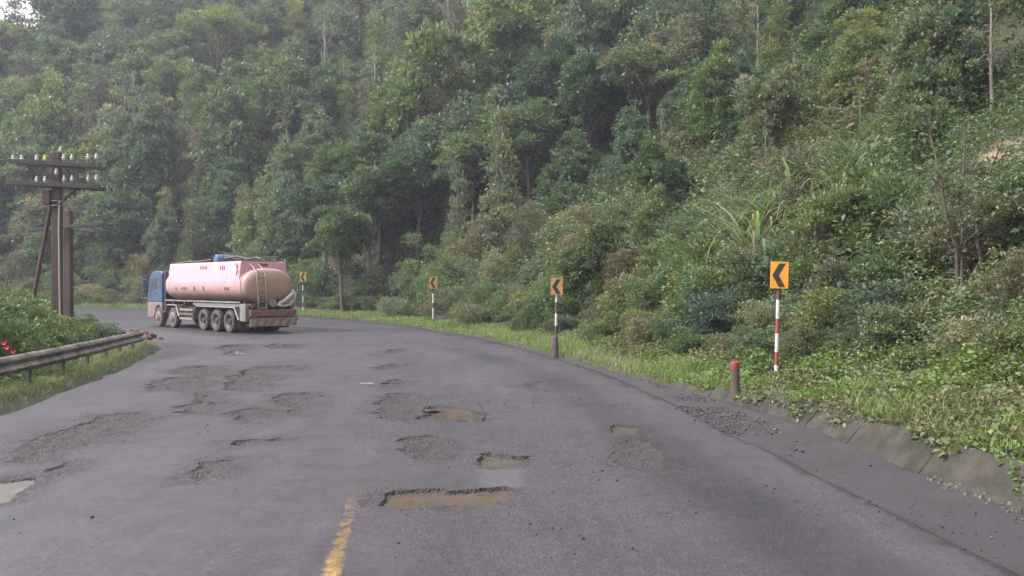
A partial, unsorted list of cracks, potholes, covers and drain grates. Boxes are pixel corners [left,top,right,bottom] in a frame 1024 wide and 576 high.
pothole [222,374,282,391]
pothole [378,487,515,510]
pothole [143,377,220,391]
pothole [397,435,459,459]
pothole [477,452,532,468]
pothole [7,412,155,463]
pothole [610,425,639,434]
pothole [369,392,439,422]
pothole [172,391,227,416]
pothole [187,460,233,481]
pothole [413,406,491,423]
pothole [0,478,37,503]
